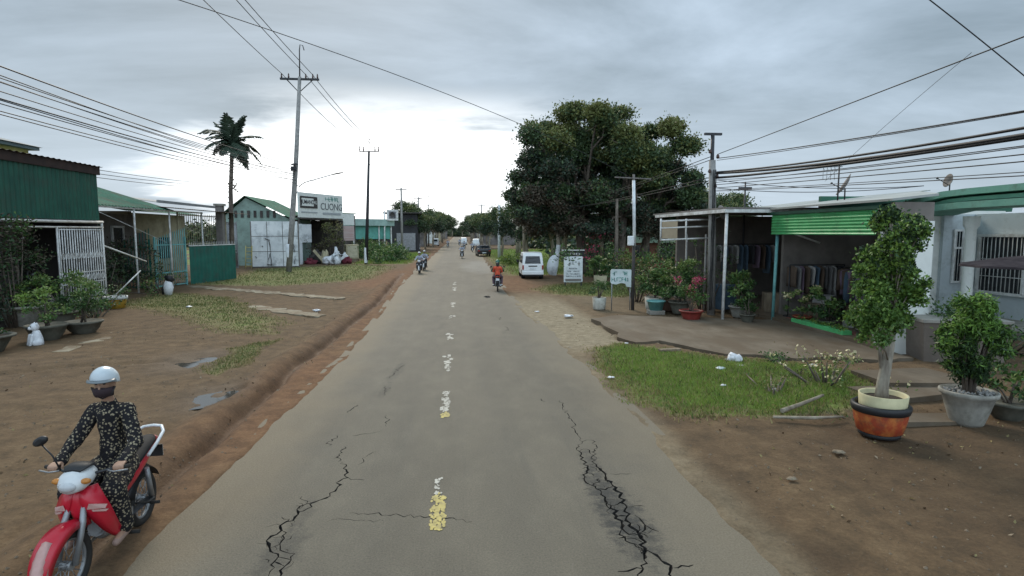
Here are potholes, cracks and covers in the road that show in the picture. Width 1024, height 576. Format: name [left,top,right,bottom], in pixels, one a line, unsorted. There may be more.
crack [559,401,693,576]
crack [259,417,461,576]
